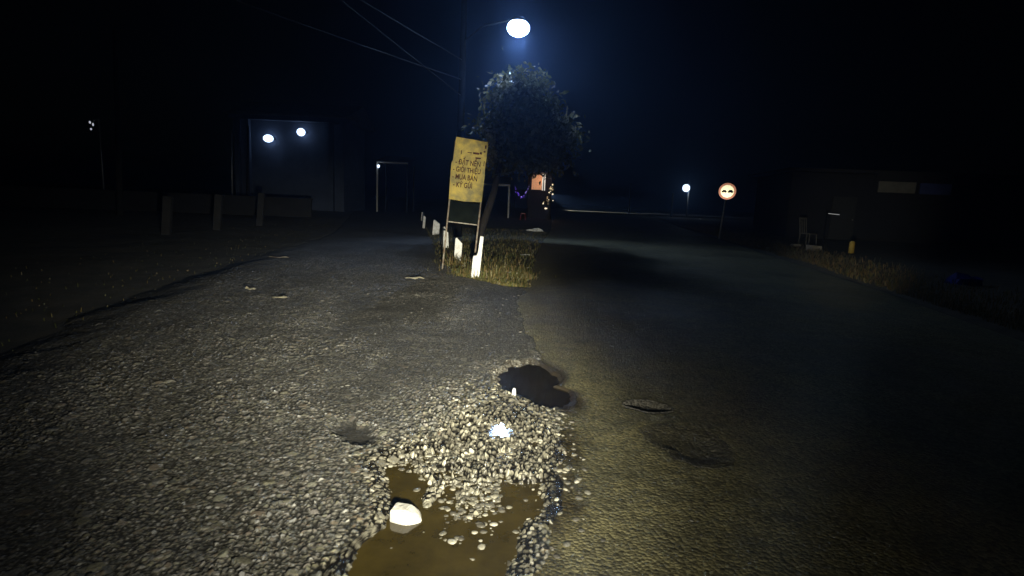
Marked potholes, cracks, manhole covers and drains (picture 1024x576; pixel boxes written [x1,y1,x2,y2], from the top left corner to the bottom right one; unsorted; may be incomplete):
pothole [638,423,736,469]
pothole [489,357,578,412]
pothole [322,394,567,576]
pothole [622,399,675,414]
